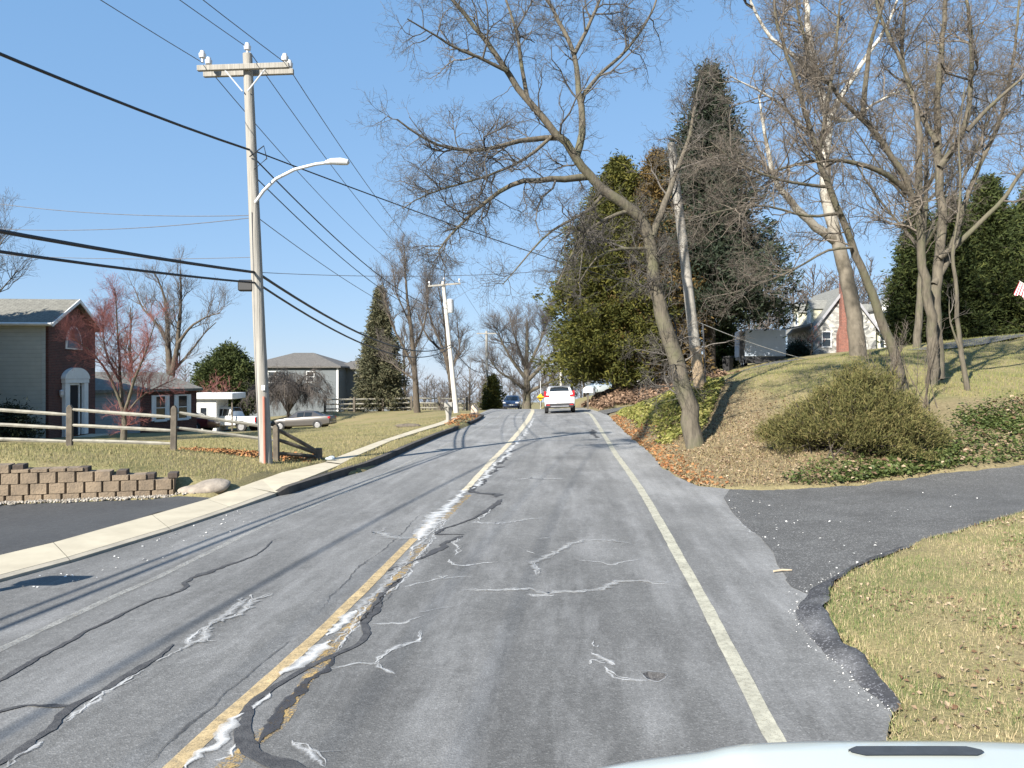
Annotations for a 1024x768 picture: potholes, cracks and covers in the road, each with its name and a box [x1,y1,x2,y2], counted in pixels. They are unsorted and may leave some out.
crack [589,640,648,681]
crack [145,594,291,767]
crack [325,489,679,673]
pothole [640,671,667,682]
crack [292,740,340,766]
